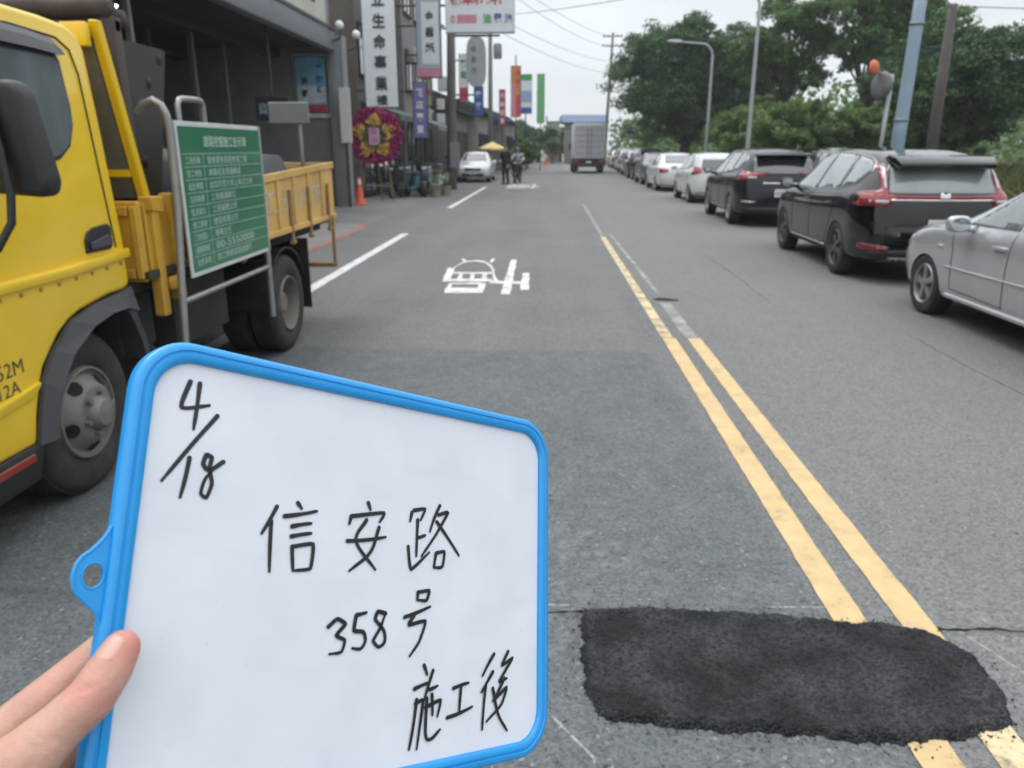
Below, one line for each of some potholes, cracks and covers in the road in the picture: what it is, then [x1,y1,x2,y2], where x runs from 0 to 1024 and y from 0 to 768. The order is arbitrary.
crack [548,611,1024,632]
crack [899,329,1023,395]
